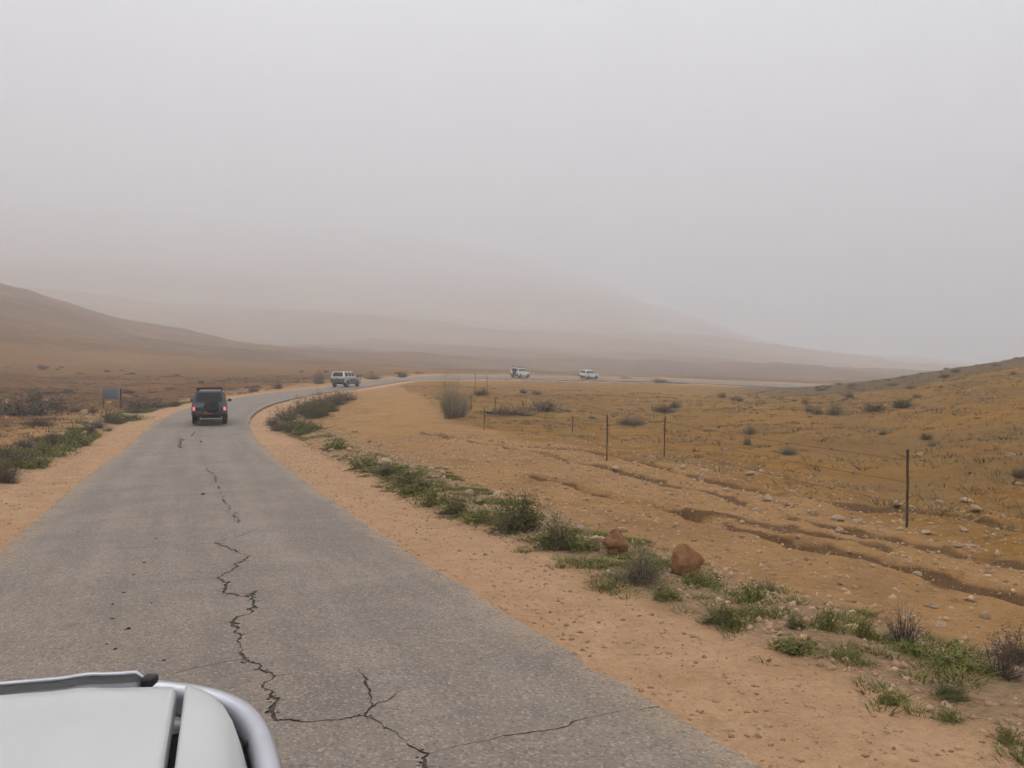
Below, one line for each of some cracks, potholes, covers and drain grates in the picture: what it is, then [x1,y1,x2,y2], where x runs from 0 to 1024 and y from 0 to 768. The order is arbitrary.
crack [36,529,657,768]
crack [159,432,241,523]
